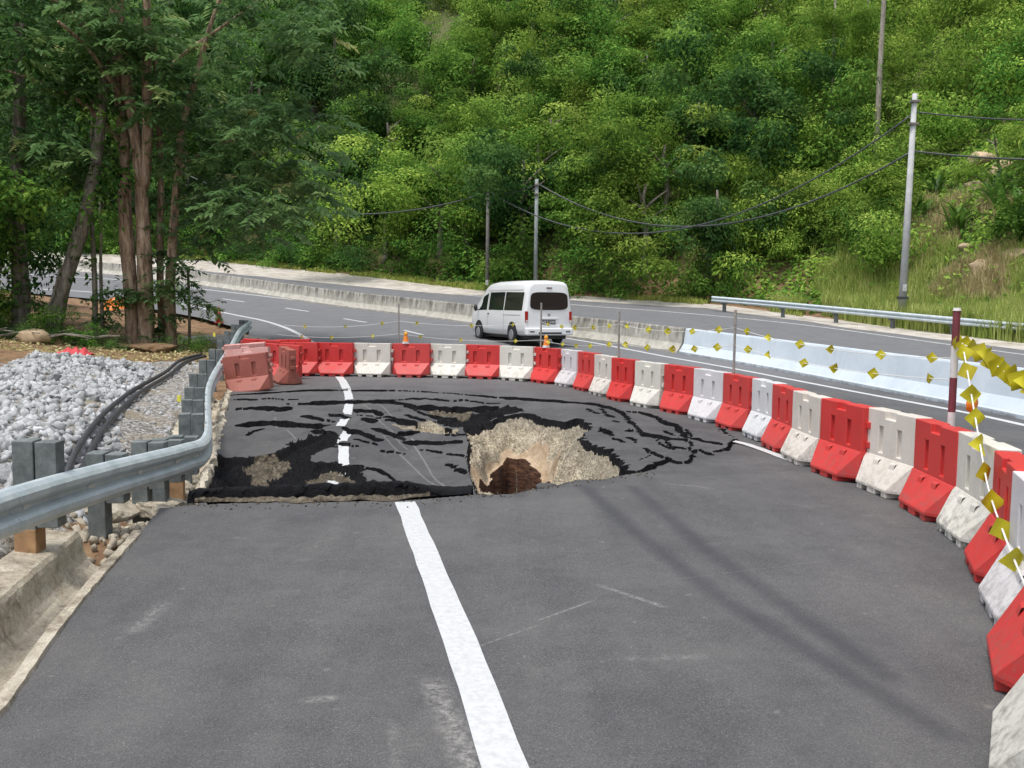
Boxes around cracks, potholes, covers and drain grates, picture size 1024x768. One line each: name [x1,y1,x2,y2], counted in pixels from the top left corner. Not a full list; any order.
pothole [426,410,474,422]
pothole [392,420,459,434]
pothole [209,429,367,488]
crack [231,389,739,481]
